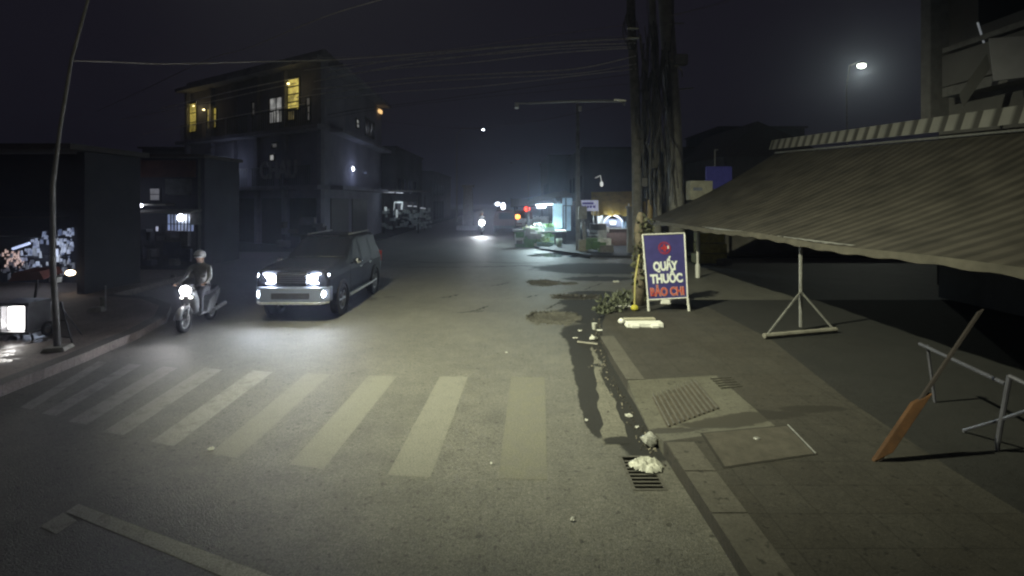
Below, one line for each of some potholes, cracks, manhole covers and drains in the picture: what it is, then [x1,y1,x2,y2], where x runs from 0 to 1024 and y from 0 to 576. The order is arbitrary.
pothole [525,310,581,325]
drain grate [619,456,668,491]
manhole cover [700,424,817,468]
pothole [526,279,562,287]
